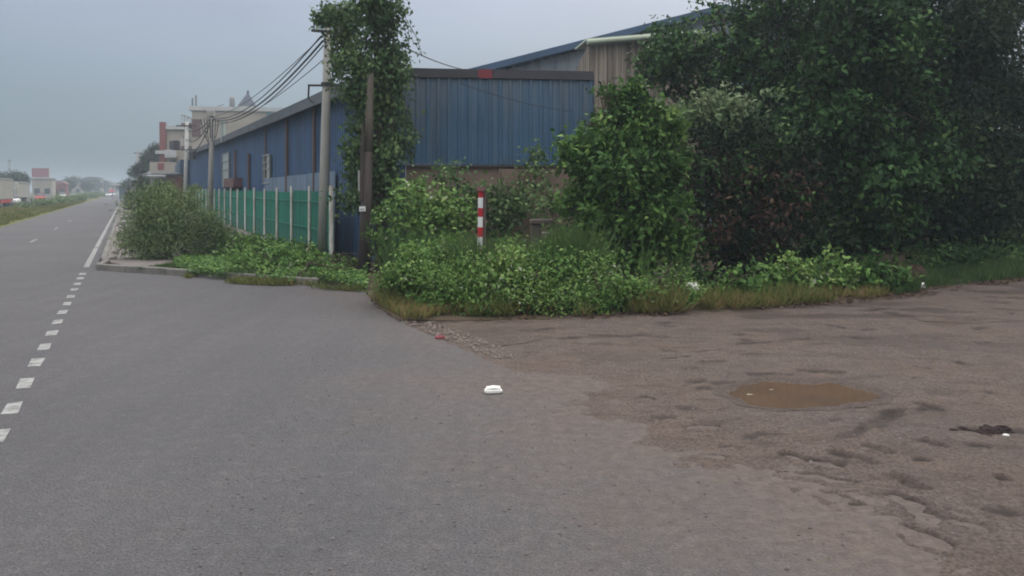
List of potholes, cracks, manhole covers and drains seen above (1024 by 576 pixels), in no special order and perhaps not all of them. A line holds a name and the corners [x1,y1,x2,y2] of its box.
pothole [712,375,897,412]
